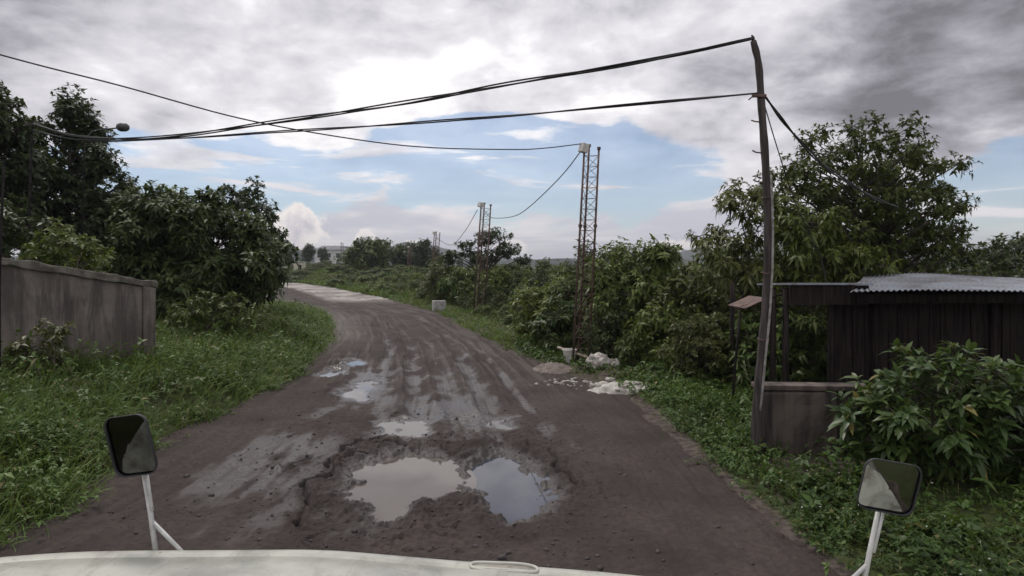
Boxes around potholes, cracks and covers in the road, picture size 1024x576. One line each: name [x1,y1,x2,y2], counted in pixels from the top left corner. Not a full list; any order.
pothole [463,446,562,525]
pothole [342,446,477,522]
